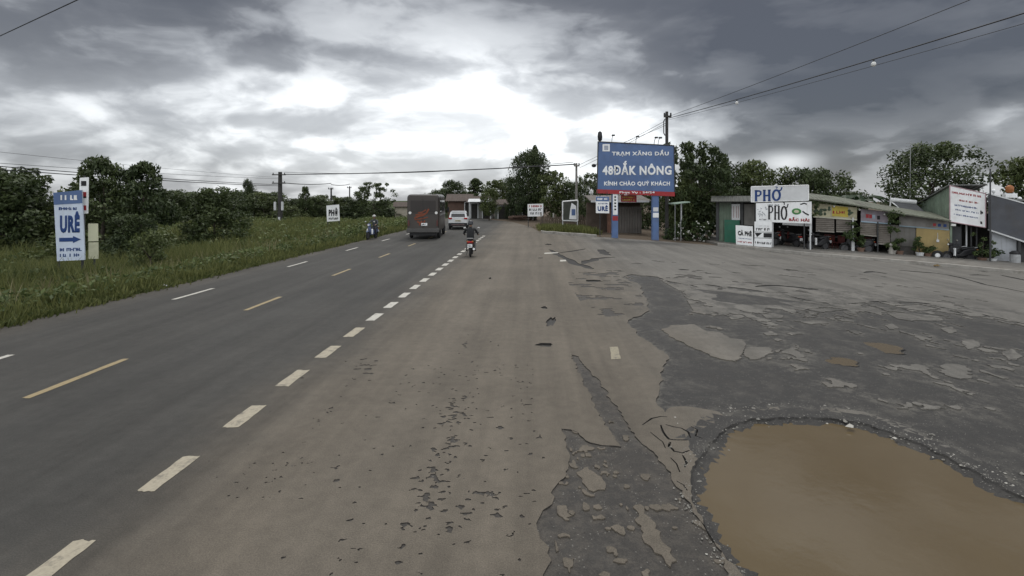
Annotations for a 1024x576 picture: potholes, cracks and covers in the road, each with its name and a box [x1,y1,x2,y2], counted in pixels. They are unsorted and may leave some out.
crack [642,416,701,490]
pothole [536,355,729,576]
pothole [669,401,1024,576]
pothole [281,365,545,576]
